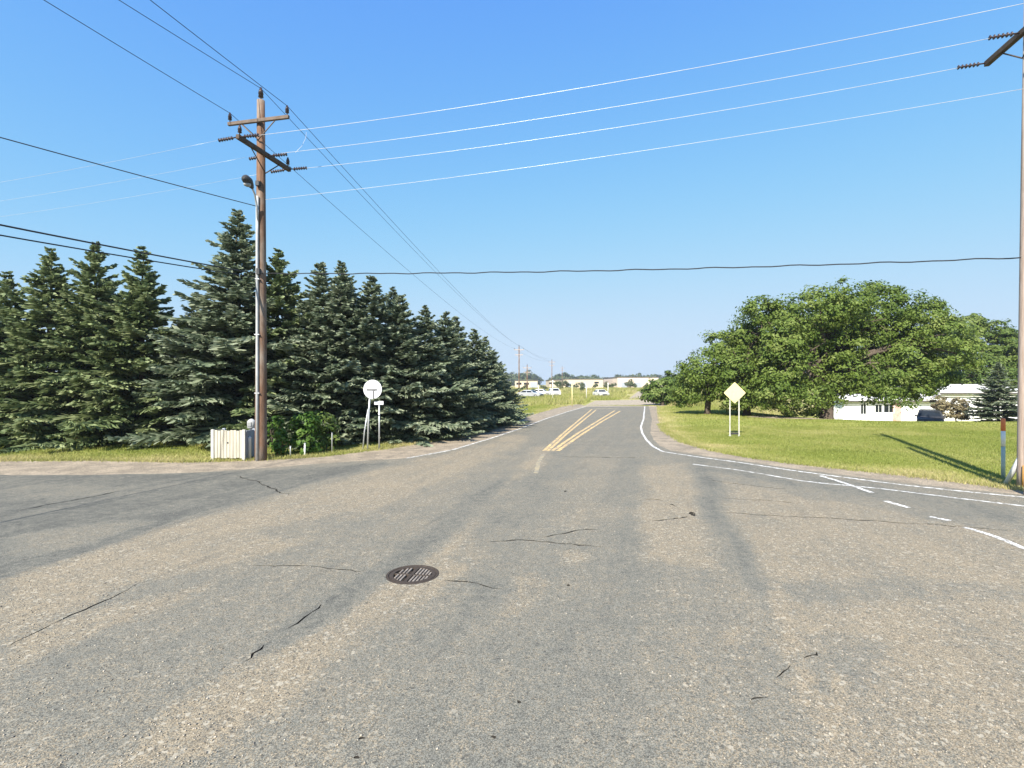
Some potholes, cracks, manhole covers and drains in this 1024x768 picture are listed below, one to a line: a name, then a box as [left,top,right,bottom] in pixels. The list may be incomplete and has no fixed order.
crack [5,581,146,647]
crack [730,498,1021,532]
crack [492,529,599,547]
